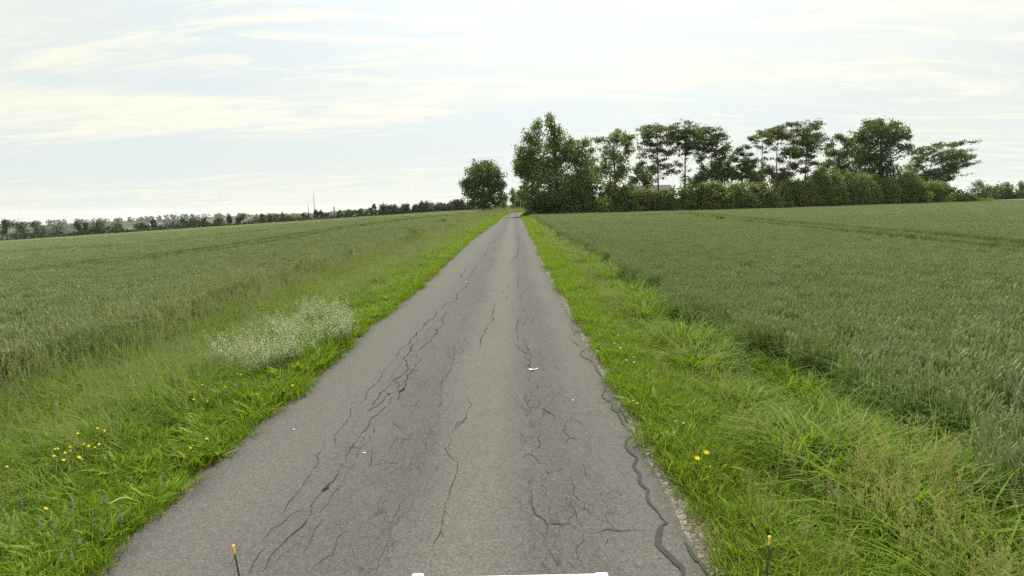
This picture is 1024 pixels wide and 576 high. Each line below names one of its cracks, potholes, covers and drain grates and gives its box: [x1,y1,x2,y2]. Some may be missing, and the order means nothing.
crack [479,242,648,567]
crack [229,240,495,573]
